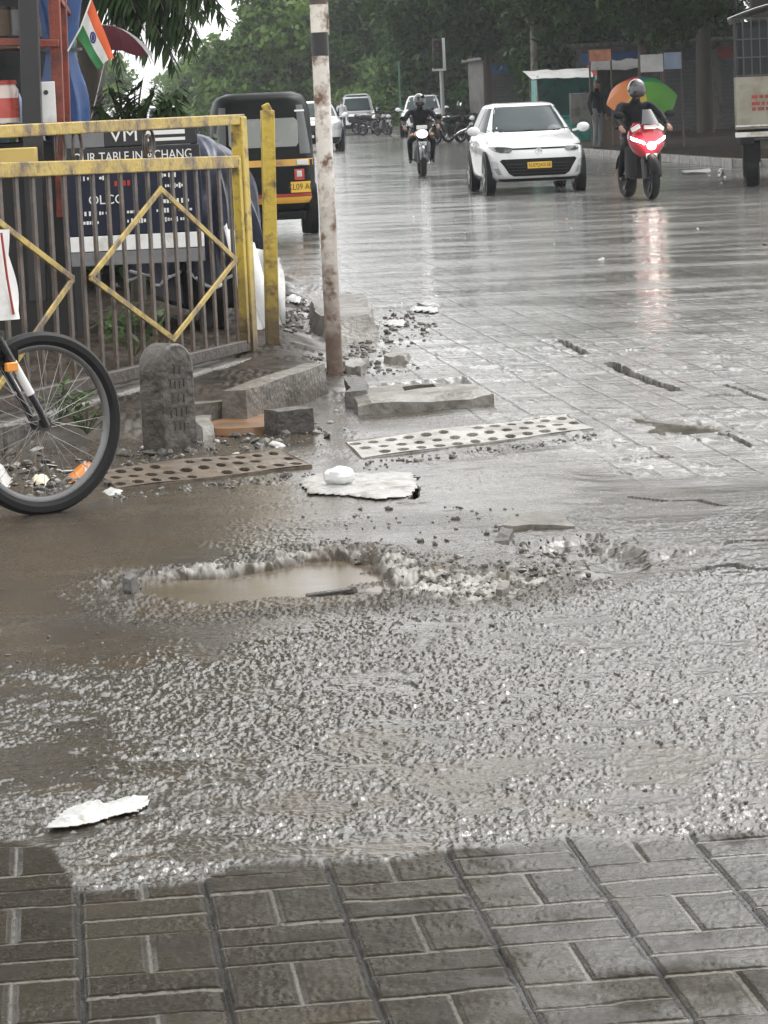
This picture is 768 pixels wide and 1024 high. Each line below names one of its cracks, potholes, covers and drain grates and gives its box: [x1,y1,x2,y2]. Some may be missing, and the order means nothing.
pothole [601,409,761,438]
pothole [87,544,563,619]
pothole [487,529,735,586]
crack [690,563,768,572]
crack [626,496,729,507]
